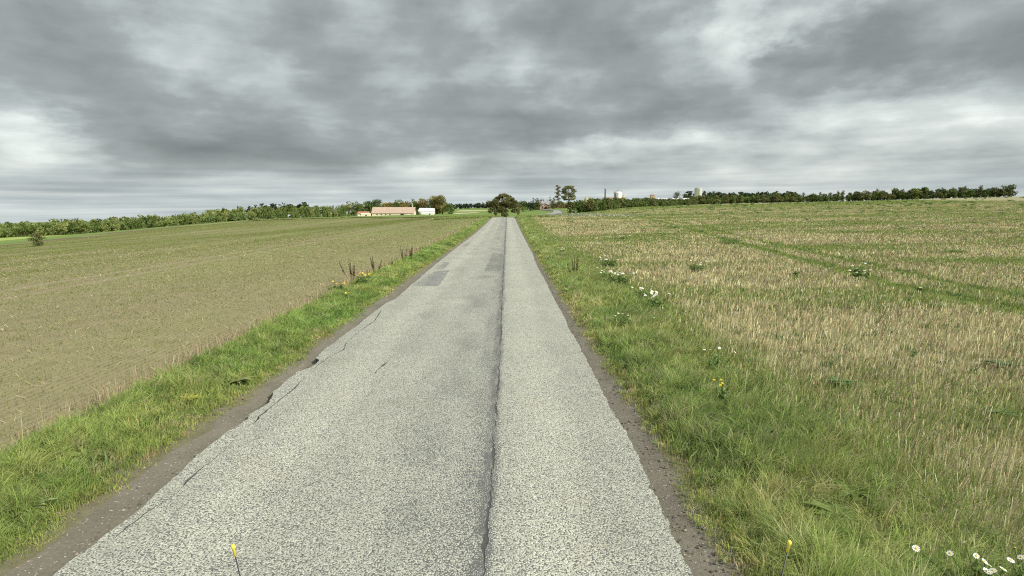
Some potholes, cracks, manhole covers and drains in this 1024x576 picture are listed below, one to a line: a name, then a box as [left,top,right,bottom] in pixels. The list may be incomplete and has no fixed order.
crack [252,311,381,424]
